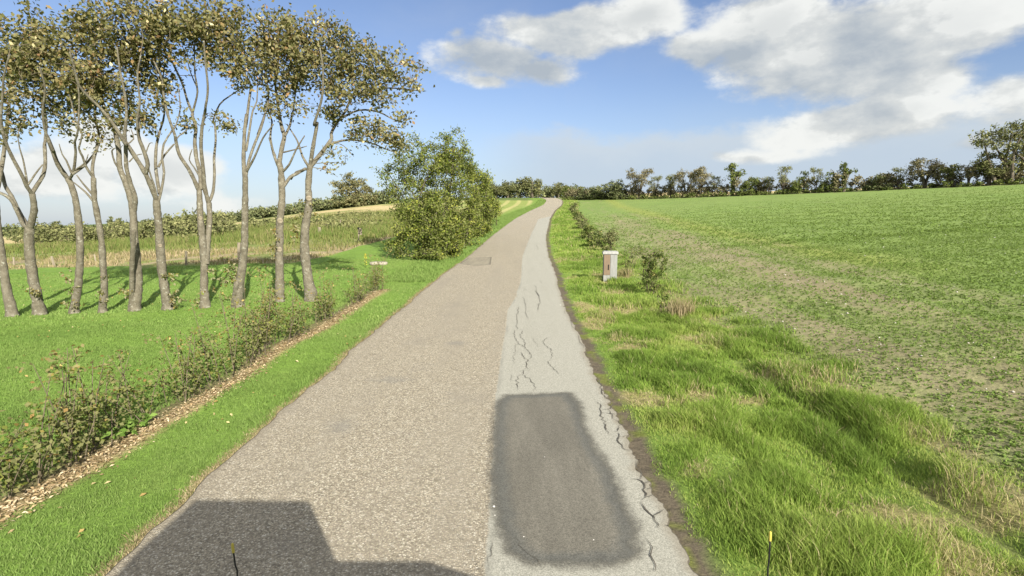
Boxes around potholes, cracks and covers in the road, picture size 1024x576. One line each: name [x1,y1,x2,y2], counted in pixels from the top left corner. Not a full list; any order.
crack [511,280,559,388]
crack [598,379,669,569]
